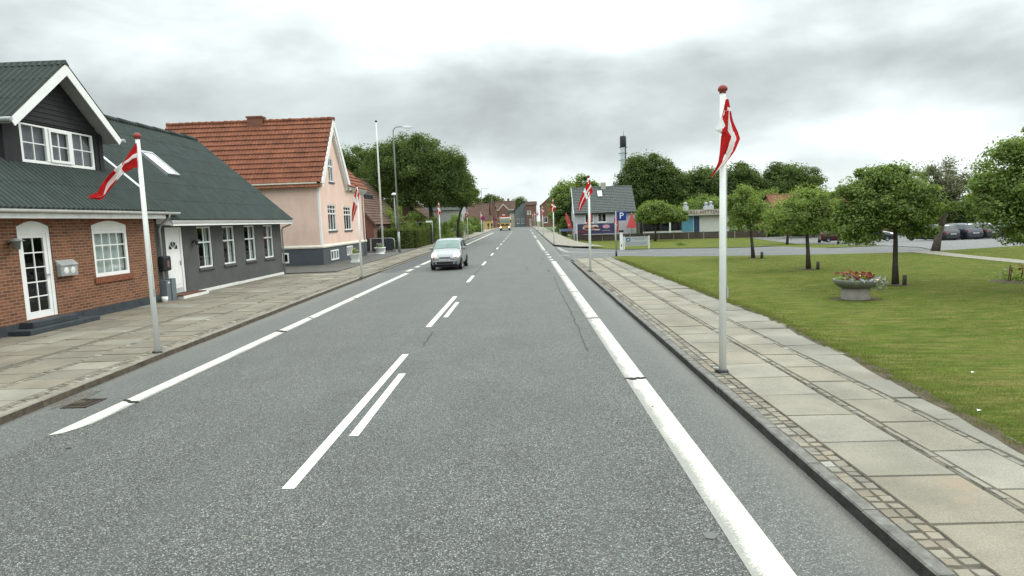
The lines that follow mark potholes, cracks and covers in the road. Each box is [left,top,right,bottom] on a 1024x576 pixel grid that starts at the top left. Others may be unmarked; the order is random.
crack [554,275,599,350]
drain grate [60,398,107,409]
